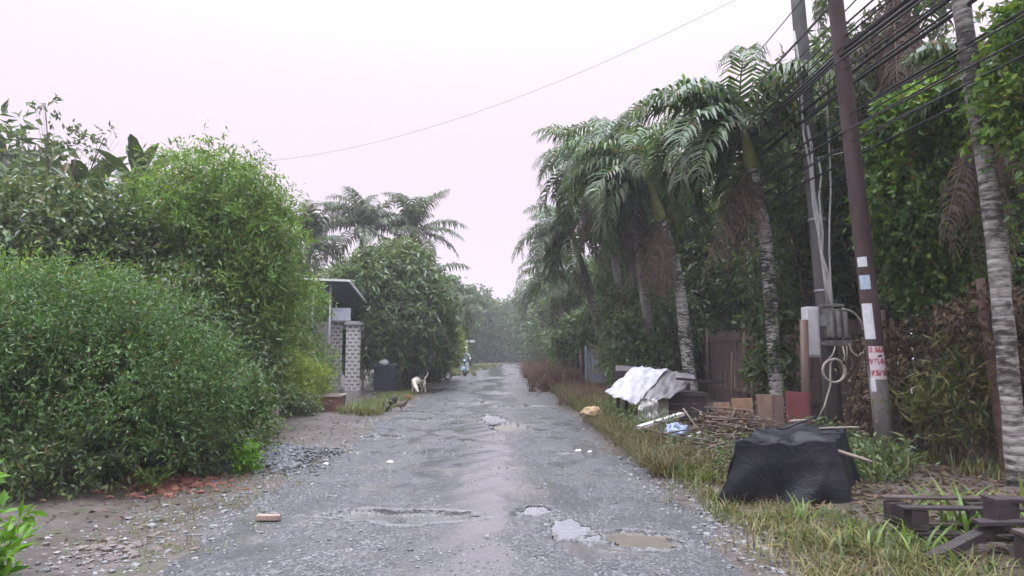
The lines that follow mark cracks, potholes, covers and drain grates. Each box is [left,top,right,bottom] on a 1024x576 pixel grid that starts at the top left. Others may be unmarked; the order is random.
pothole [478,413,511,425]
pothole [575,528,696,552]
pothole [545,516,608,546]
pothole [308,508,494,527]
pothole [515,504,556,517]
pothole [482,422,536,432]
